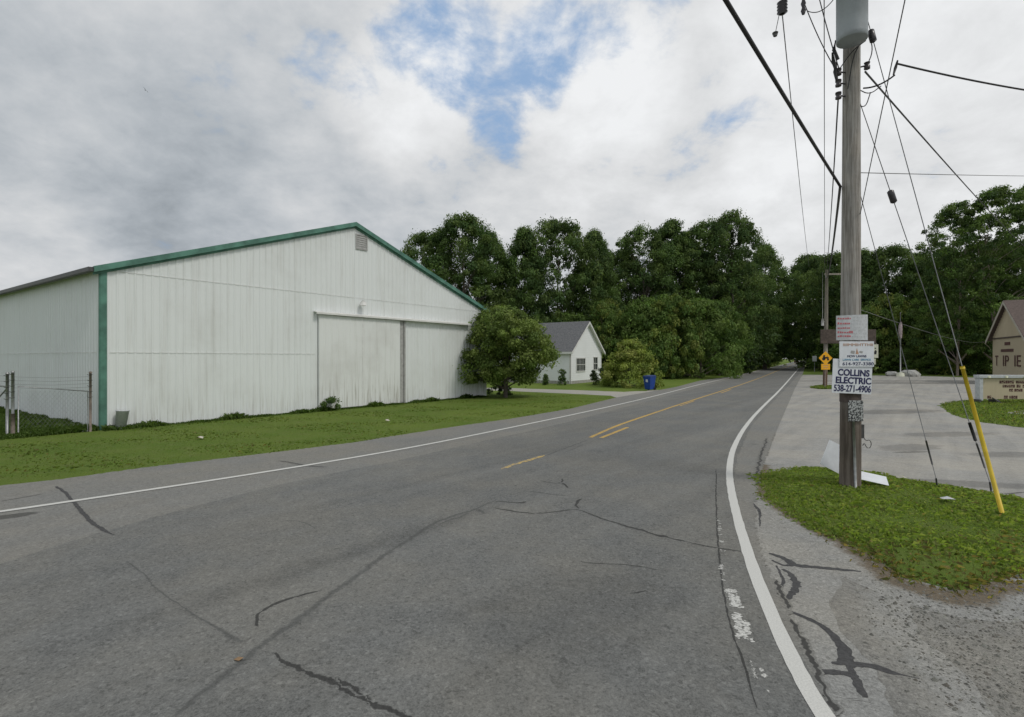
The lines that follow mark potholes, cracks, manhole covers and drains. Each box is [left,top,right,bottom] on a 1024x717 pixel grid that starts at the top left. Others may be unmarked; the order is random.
crack [773,578,872,716]
crack [490,478,742,552]
crack [125,560,414,717]
